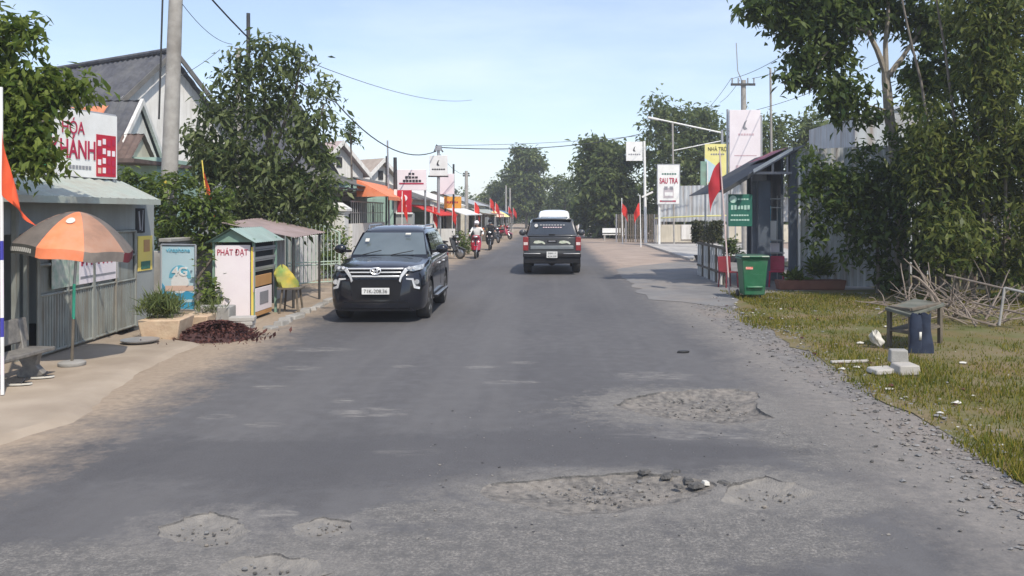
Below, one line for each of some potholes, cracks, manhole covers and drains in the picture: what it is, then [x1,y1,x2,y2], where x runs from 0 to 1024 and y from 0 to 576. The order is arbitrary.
pothole [157,511,251,549]
pothole [480,468,731,517]
pothole [217,553,335,576]
pothole [613,389,774,425]
pothole [292,517,353,540]
pothole [721,475,825,510]
